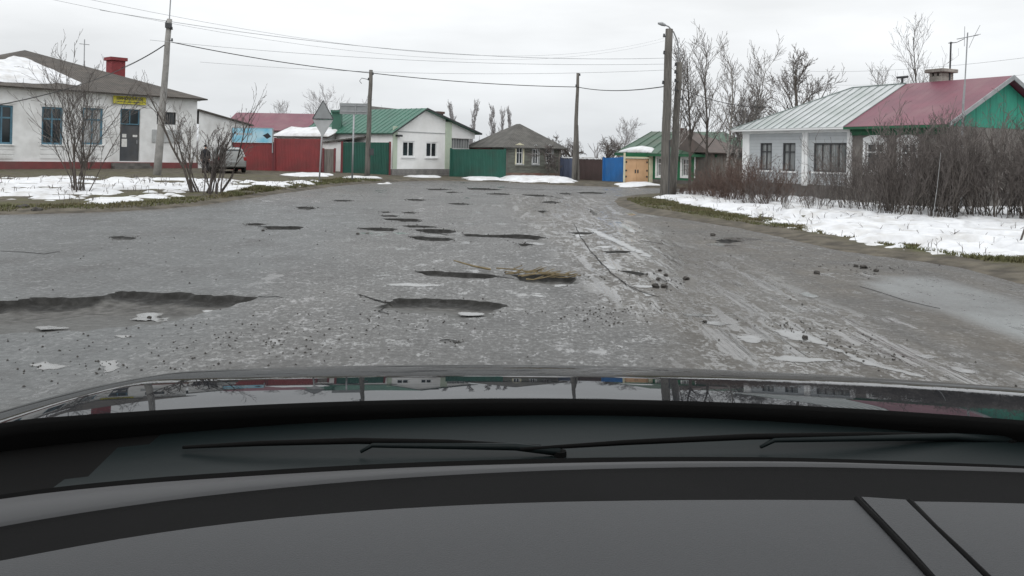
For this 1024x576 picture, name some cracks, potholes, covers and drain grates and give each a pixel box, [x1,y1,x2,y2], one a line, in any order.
pothole [416,271,498,279]
pothole [370,298,509,319]
pothole [0,291,258,335]
